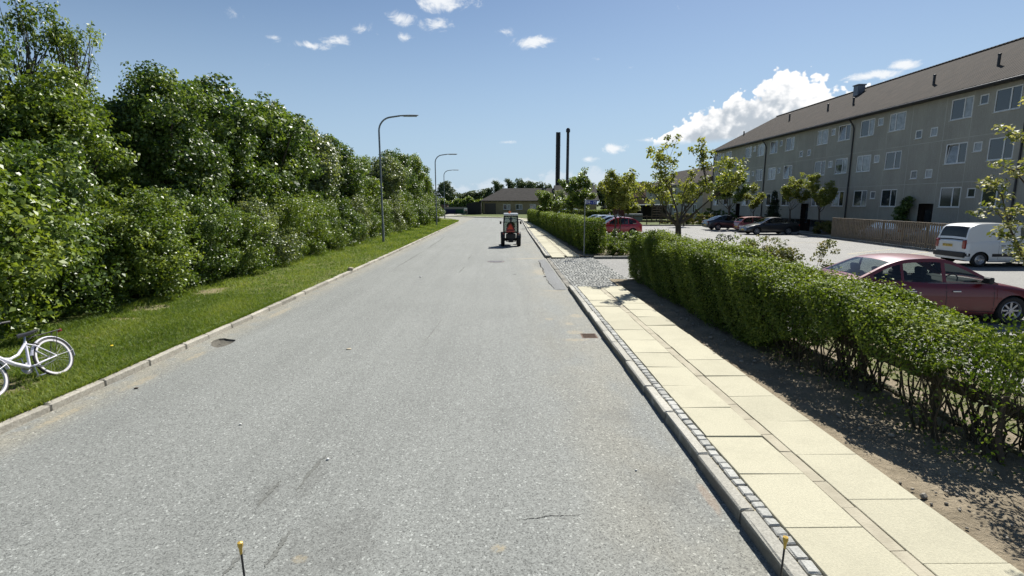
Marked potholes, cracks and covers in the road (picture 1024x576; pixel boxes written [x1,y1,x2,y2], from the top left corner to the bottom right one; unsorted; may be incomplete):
pothole [211,338,235,348]
crack [257,455,326,507]
crack [264,530,291,567]
